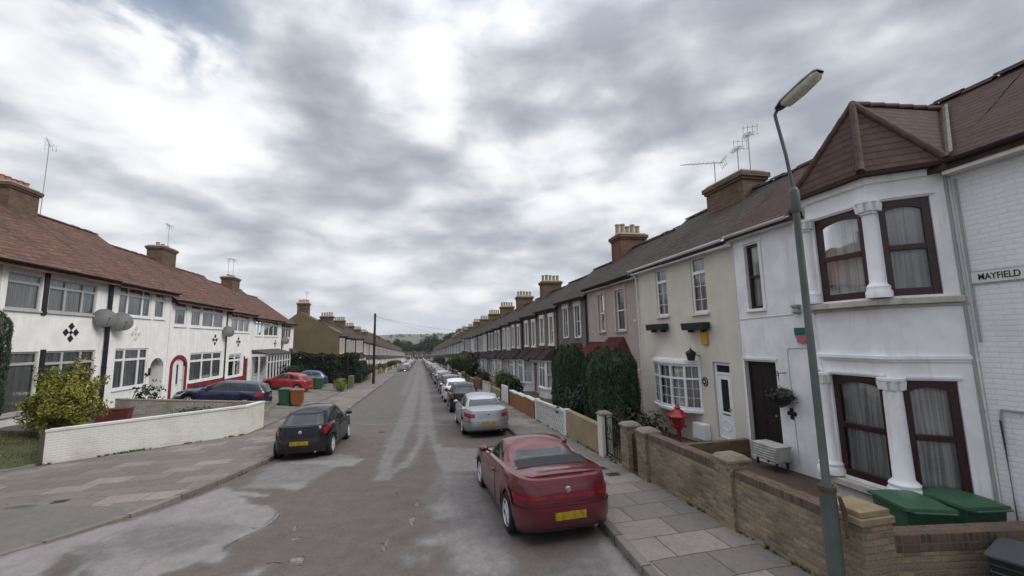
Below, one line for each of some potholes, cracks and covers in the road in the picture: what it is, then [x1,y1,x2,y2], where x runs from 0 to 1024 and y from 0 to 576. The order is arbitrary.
pothole [375,536,393,555]
pothole [282,554,311,566]
pothole [405,514,420,528]
